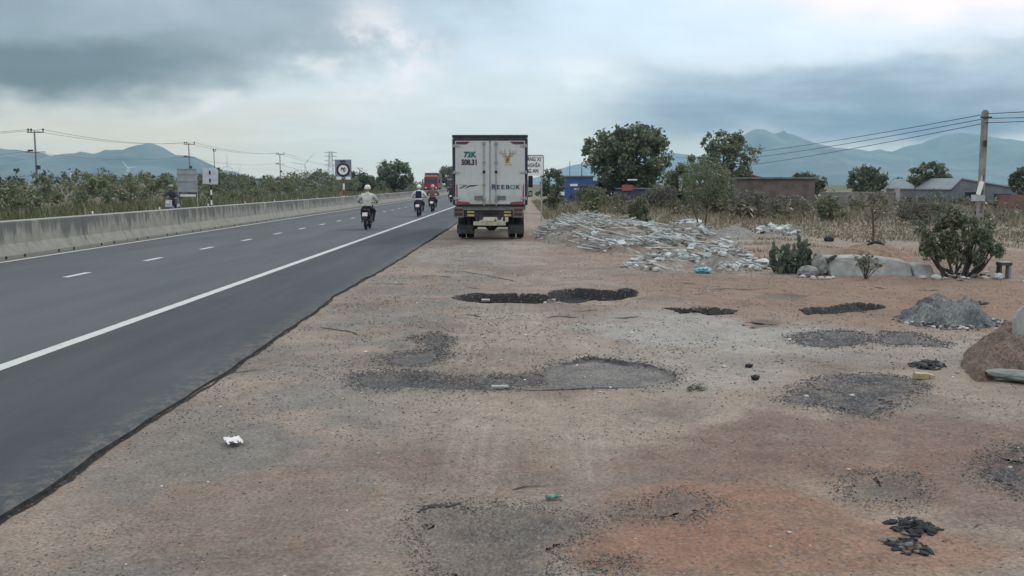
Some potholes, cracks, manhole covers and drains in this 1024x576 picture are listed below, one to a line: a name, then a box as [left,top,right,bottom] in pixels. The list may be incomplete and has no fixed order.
pothole [799,302,886,315]
pothole [664,306,737,315]
pothole [451,288,638,304]
